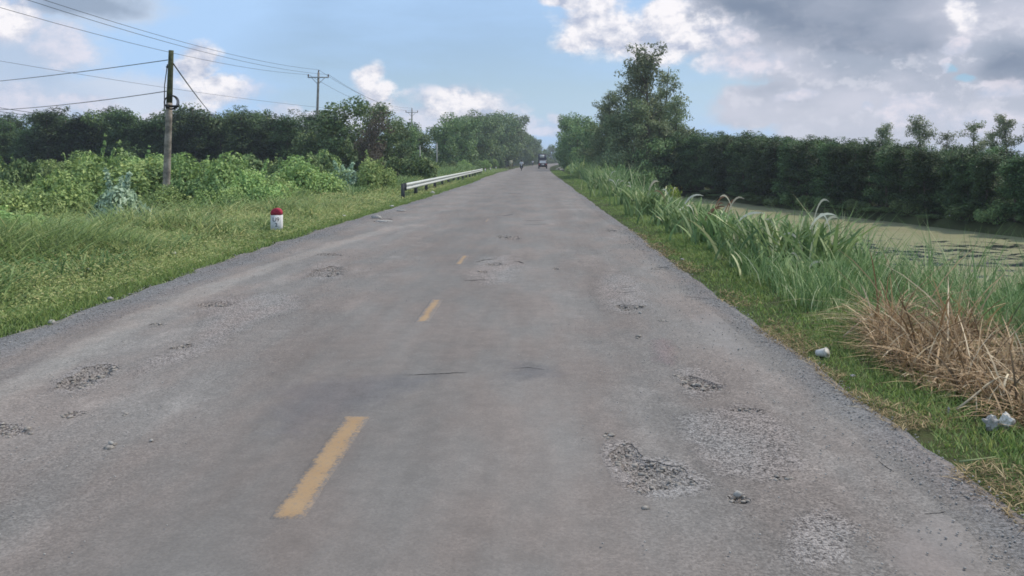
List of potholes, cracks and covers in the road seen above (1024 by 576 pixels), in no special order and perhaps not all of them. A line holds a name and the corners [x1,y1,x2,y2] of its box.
pothole [307,266,344,277]
pothole [607,443,697,494]
pothole [0,420,33,438]
pothole [679,376,727,392]
pothole [60,411,87,419]
pothole [55,364,119,392]
